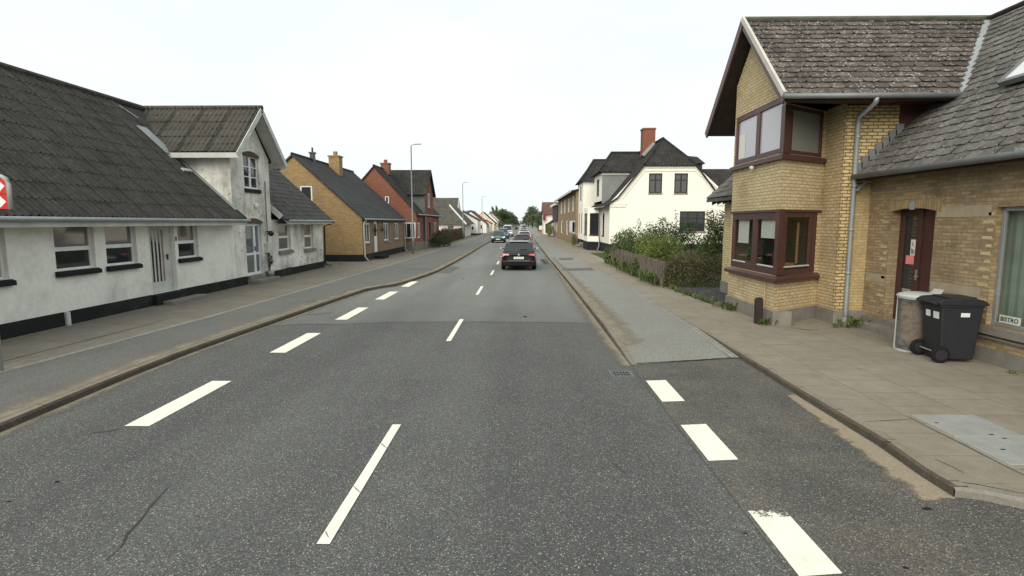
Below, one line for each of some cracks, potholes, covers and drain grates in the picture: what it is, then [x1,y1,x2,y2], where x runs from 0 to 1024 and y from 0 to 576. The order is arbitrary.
crack [107,490,165,560]
